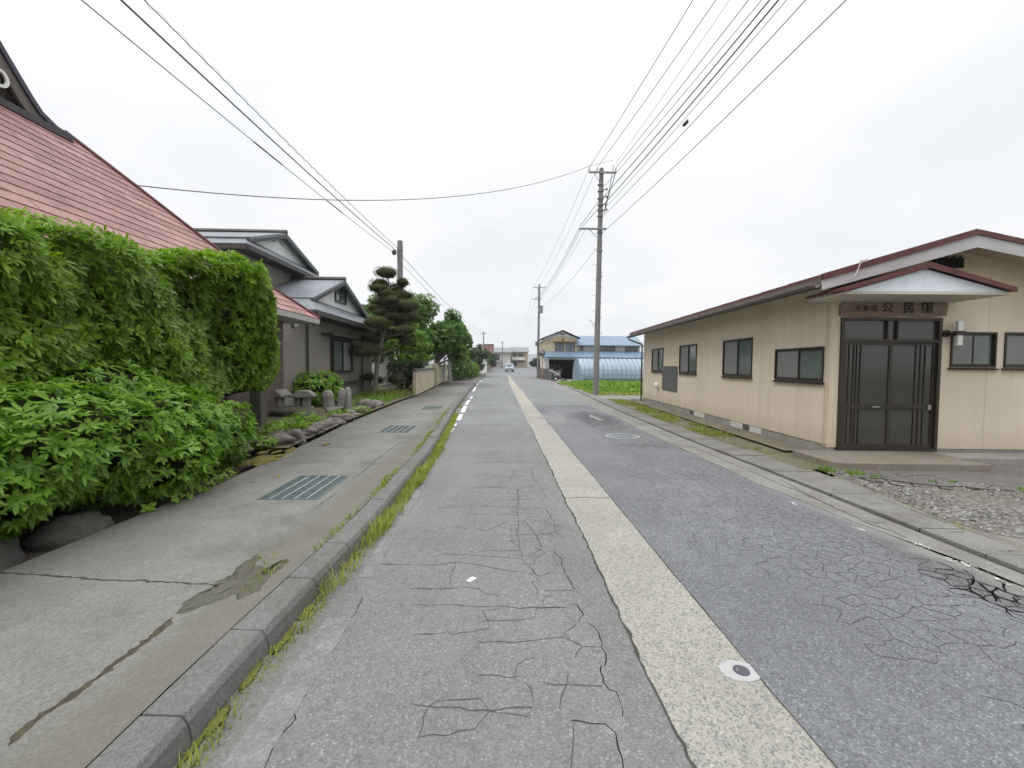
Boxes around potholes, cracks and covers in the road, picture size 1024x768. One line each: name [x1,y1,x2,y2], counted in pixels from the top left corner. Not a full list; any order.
drain grate [256,475,350,500]
crack [572,402,1024,728]
crack [410,448,624,768]
crack [8,617,173,745]
